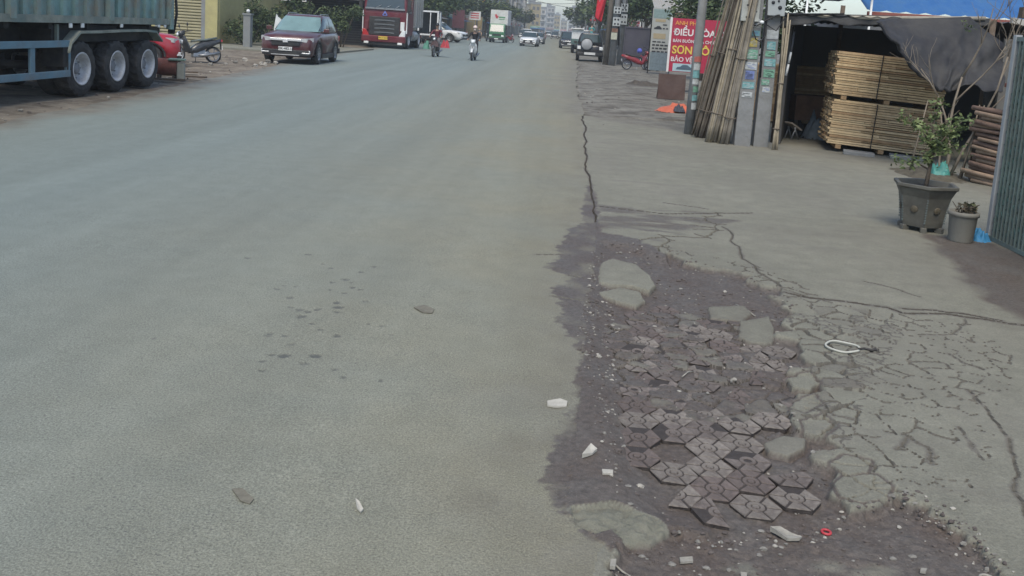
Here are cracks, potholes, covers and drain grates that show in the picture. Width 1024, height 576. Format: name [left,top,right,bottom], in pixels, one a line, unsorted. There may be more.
pothole [571,481,1024,576]
pothole [577,238,892,548]
crack [581,116,782,291]
crack [665,245,1024,516]
